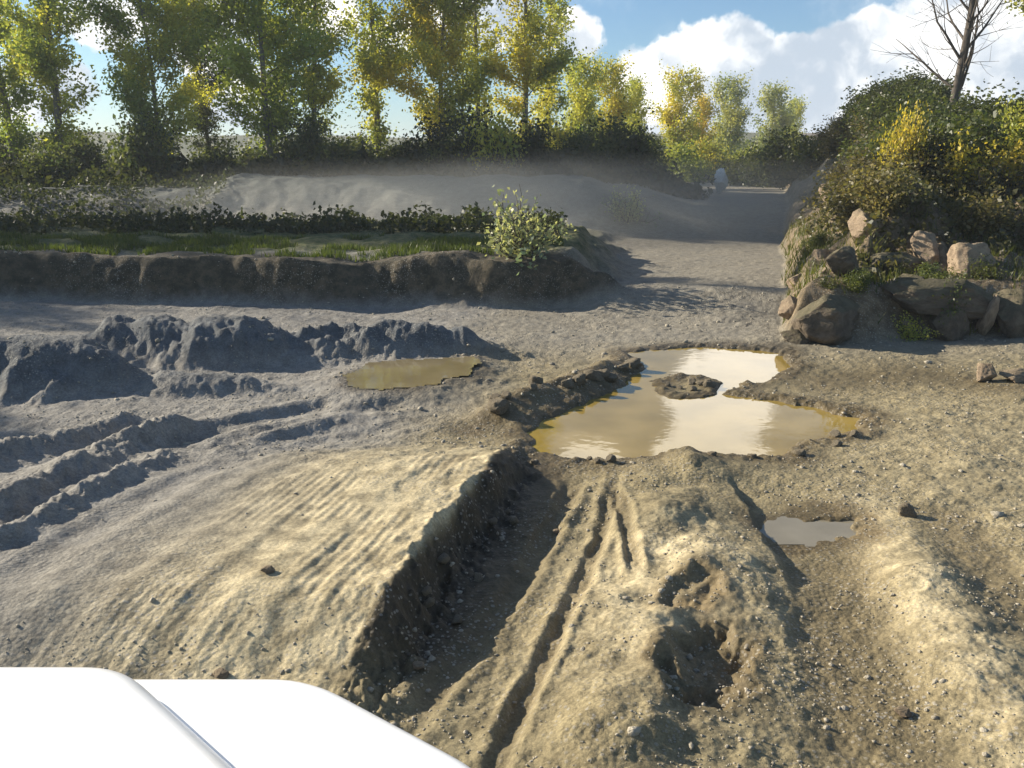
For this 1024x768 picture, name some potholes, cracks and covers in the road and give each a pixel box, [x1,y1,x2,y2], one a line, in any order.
pothole [642,618,766,713]
pothole [342,356,482,391]
pothole [657,556,730,613]
pothole [521,343,871,460]
pothole [758,513,868,547]
